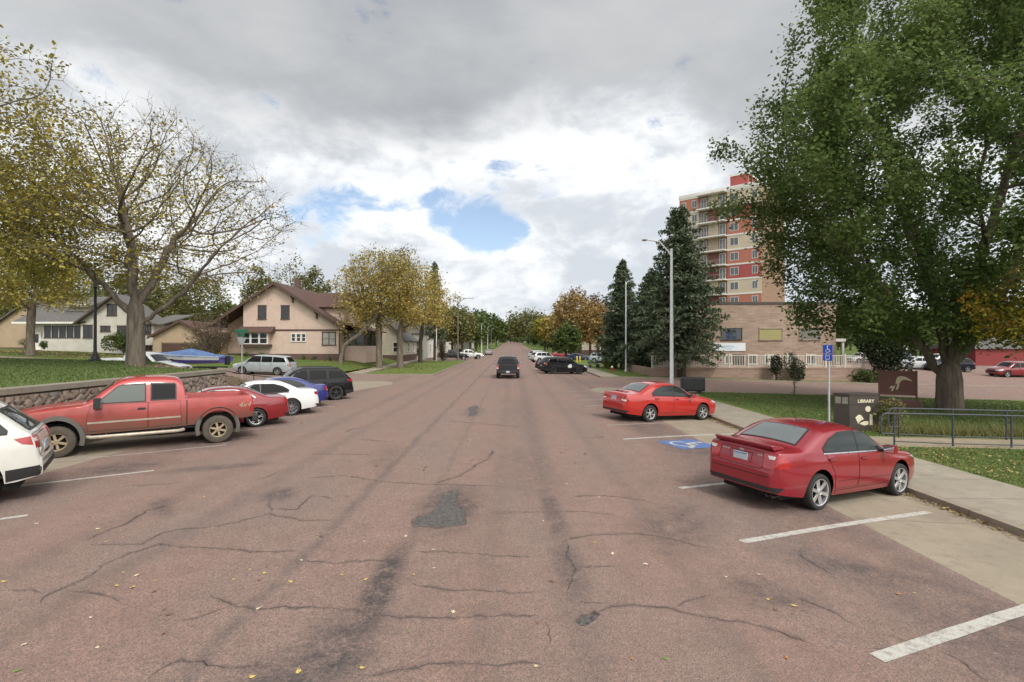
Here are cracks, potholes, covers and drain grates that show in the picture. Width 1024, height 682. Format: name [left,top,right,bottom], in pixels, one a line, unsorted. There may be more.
crack [599,596,810,644]
crack [148,660,290,679]
crack [1,496,324,603]
crack [315,450,493,486]
crack [377,662,542,675]
crack [565,533,713,590]
